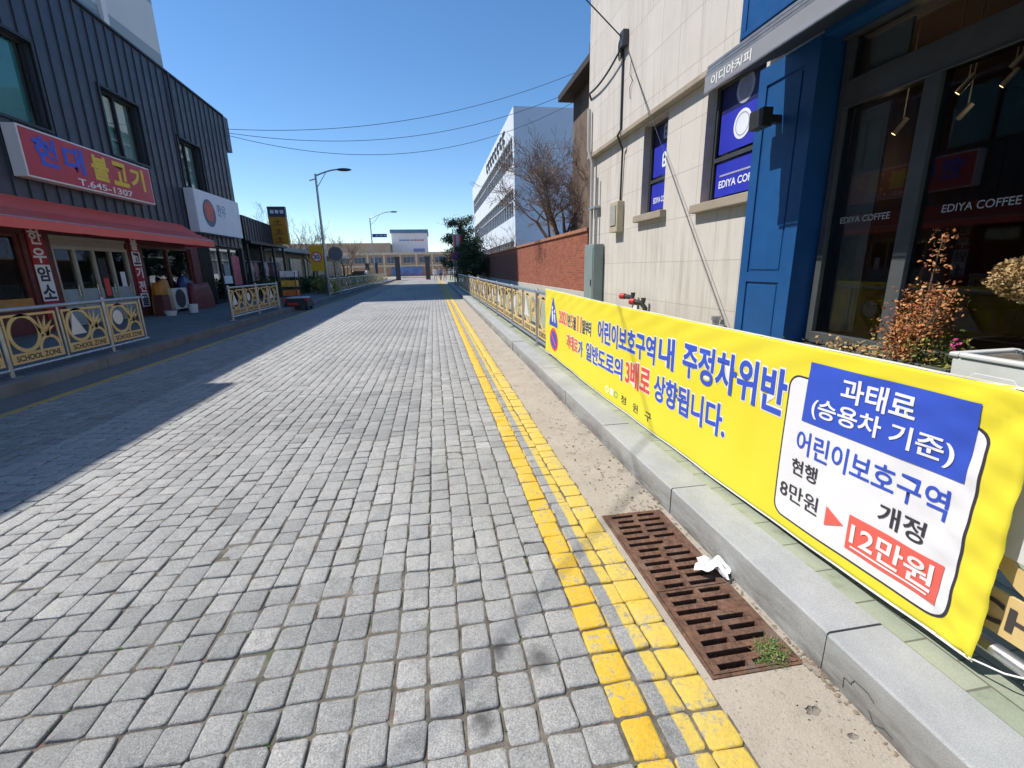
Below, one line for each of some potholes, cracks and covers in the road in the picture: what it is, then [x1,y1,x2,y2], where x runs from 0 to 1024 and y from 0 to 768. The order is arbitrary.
drain grate [602,509,803,707]
crack [842,677,893,739]
